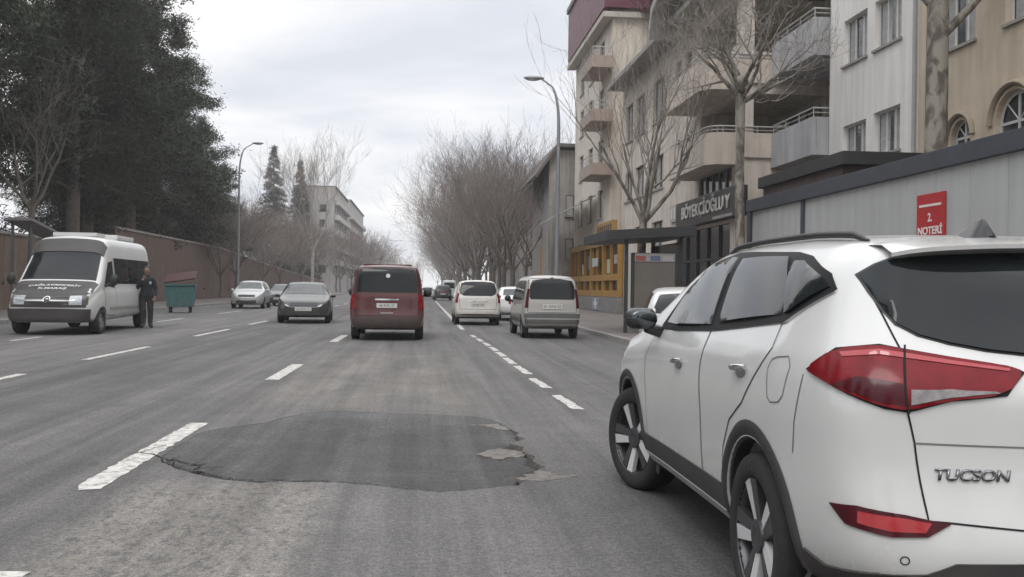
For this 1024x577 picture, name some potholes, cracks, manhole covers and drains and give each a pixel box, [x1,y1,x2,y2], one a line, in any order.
crack [126,444,223,474]
